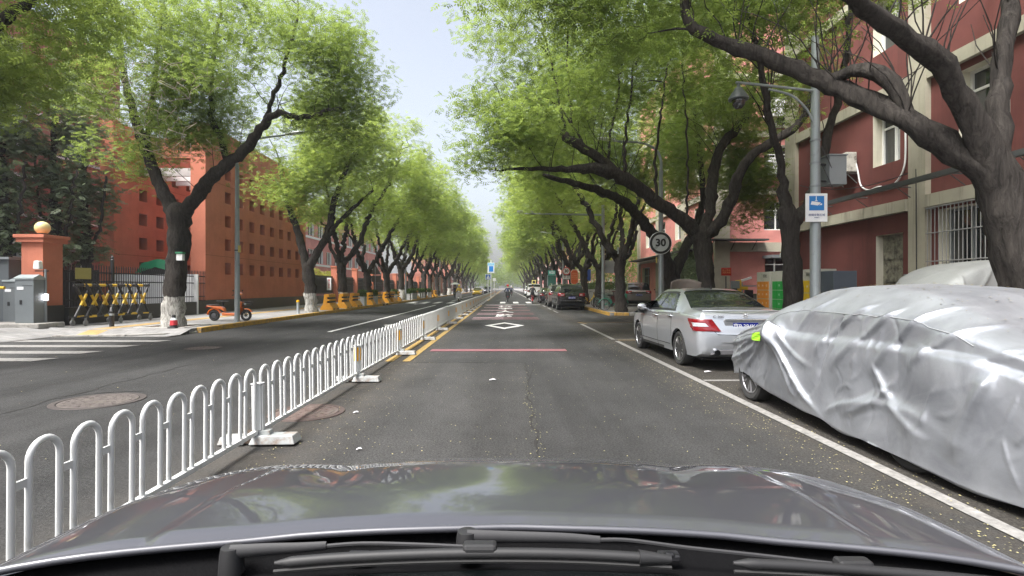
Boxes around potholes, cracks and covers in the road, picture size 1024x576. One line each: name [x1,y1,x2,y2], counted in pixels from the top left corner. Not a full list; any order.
manhole cover [267,404,345,422]
manhole cover [47,393,147,410]
crack [441,362,540,456]
